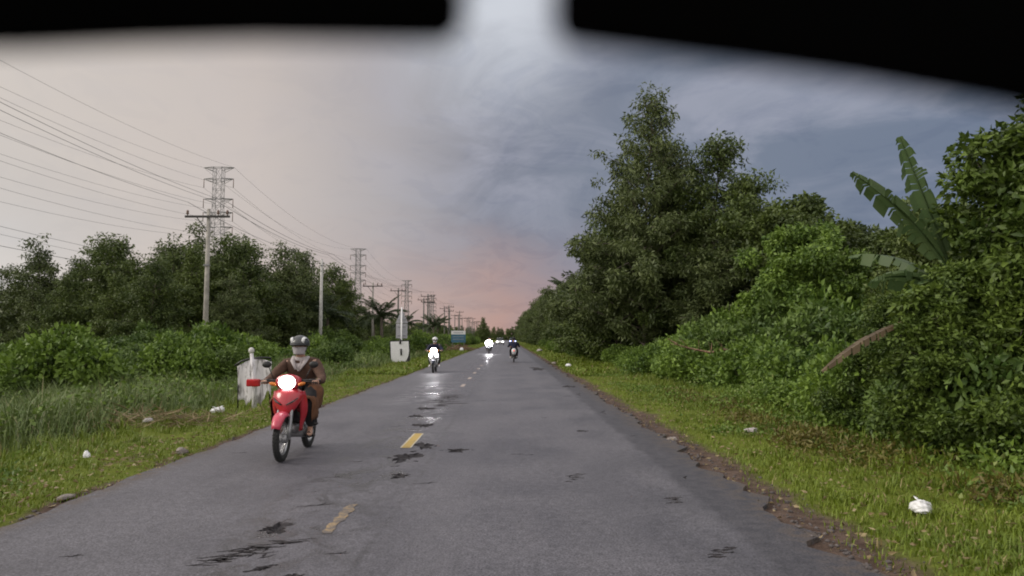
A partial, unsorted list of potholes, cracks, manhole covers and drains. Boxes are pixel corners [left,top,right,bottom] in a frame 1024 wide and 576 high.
pothole [258,522,294,534]
pothole [388,451,425,464]
